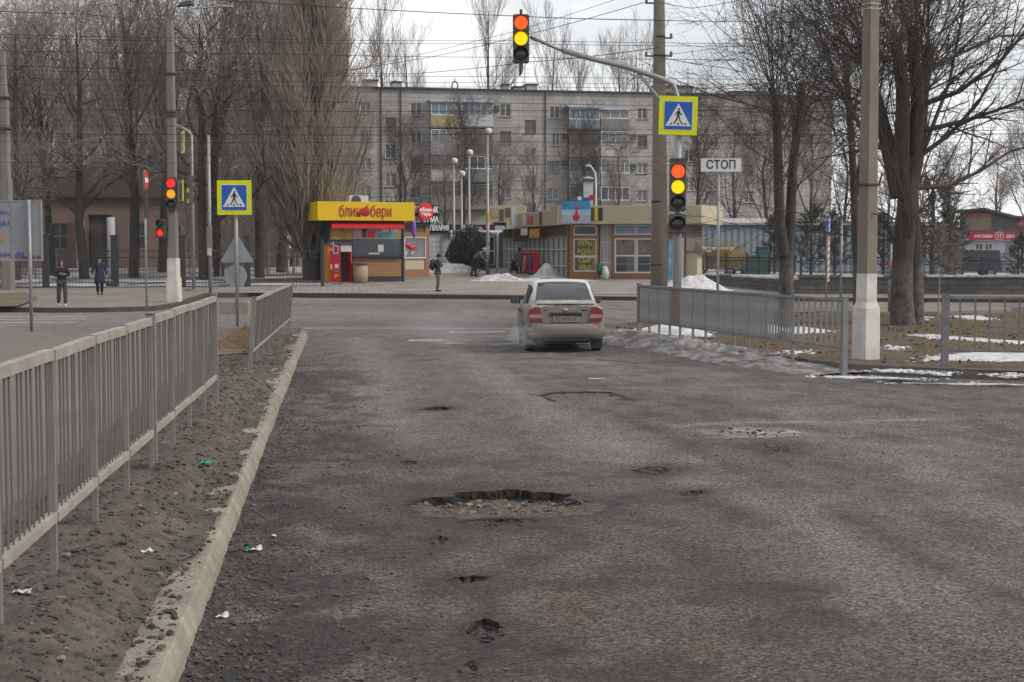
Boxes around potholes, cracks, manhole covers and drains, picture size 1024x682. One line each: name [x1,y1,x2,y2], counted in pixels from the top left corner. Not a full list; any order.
pothole [425,535,450,545]
pothole [628,466,672,476]
pothole [714,426,804,438]
pothole [459,660,480,676]
pothole [401,489,607,519]
pothole [465,618,506,644]
pothole [540,392,623,401]
pothole [446,575,492,584]
